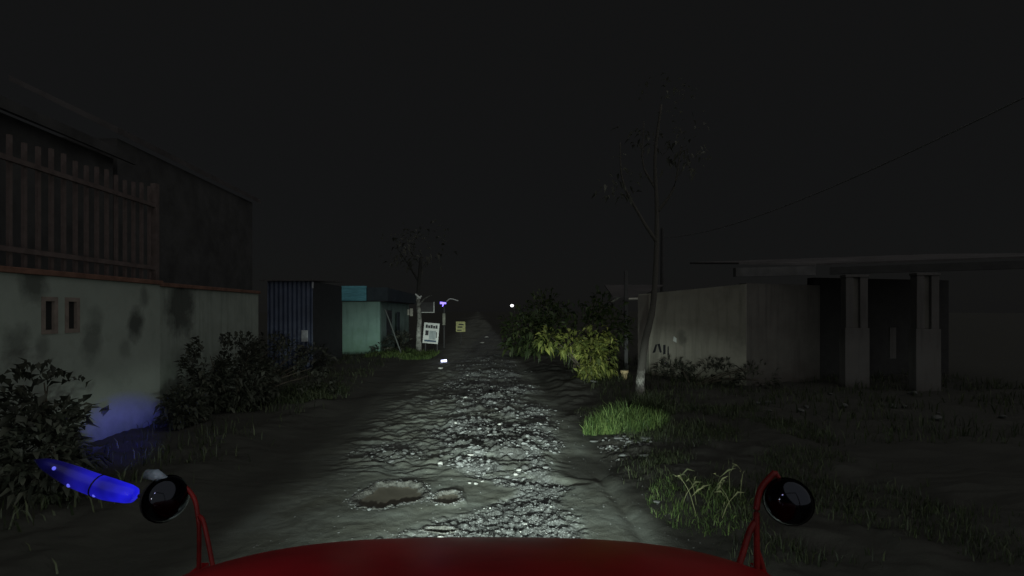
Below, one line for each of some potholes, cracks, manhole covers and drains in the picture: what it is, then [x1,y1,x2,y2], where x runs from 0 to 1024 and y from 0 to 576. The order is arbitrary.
pothole [430,489,463,505]
pothole [349,480,430,510]
